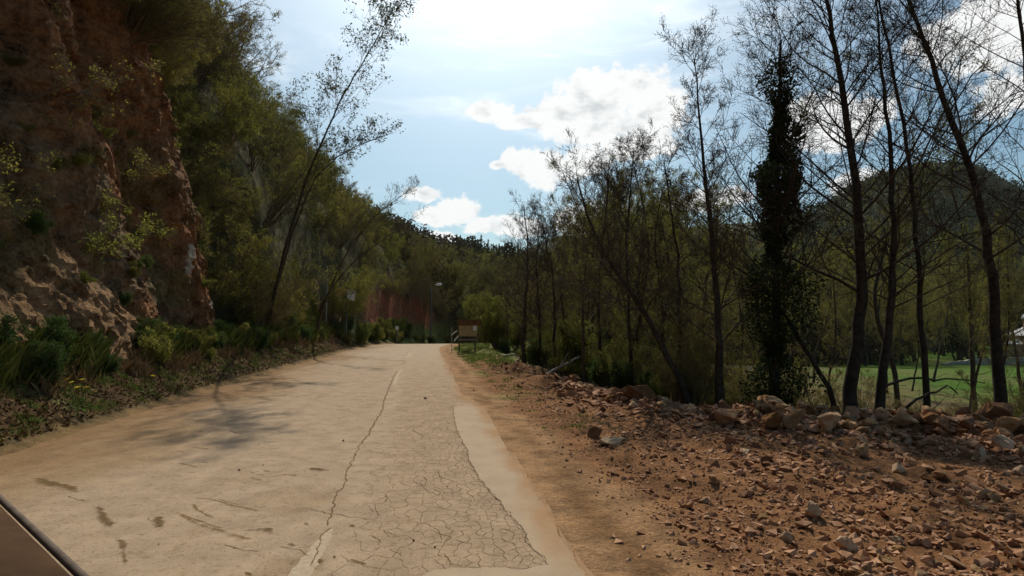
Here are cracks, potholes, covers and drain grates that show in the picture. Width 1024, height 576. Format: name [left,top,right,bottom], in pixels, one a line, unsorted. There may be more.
crack [301,372,545,576]
